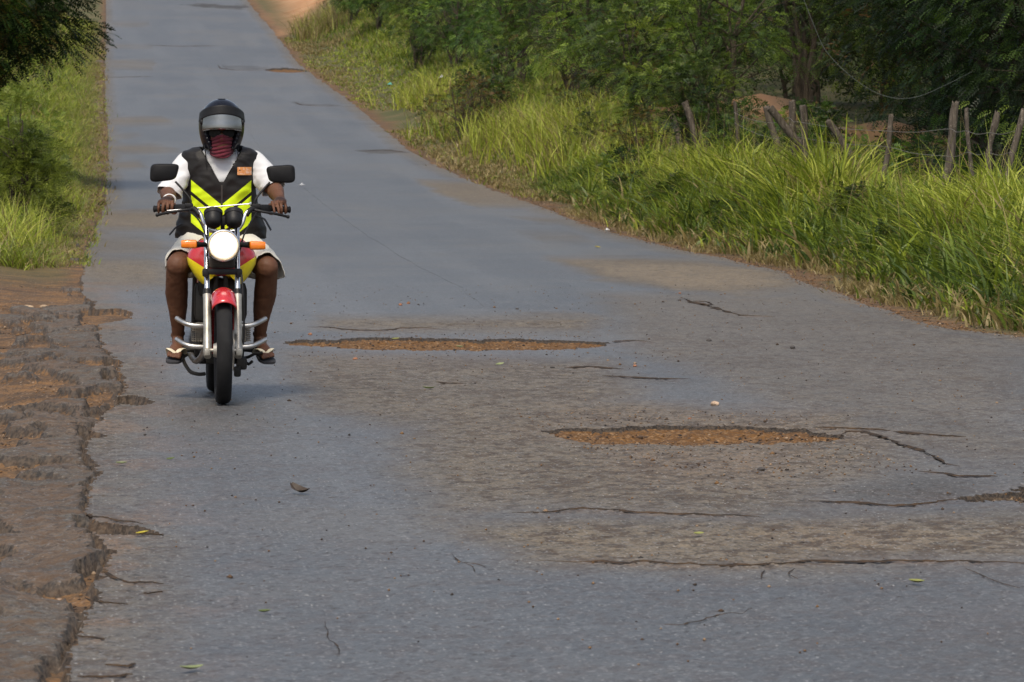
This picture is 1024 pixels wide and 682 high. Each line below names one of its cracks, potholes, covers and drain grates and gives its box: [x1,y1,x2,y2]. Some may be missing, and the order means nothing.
pothole [283,337,610,351]
crack [452,554,798,579]
pothole [541,425,844,446]
crack [681,297,775,317]
crack [818,427,995,477]
crack [512,507,764,518]
